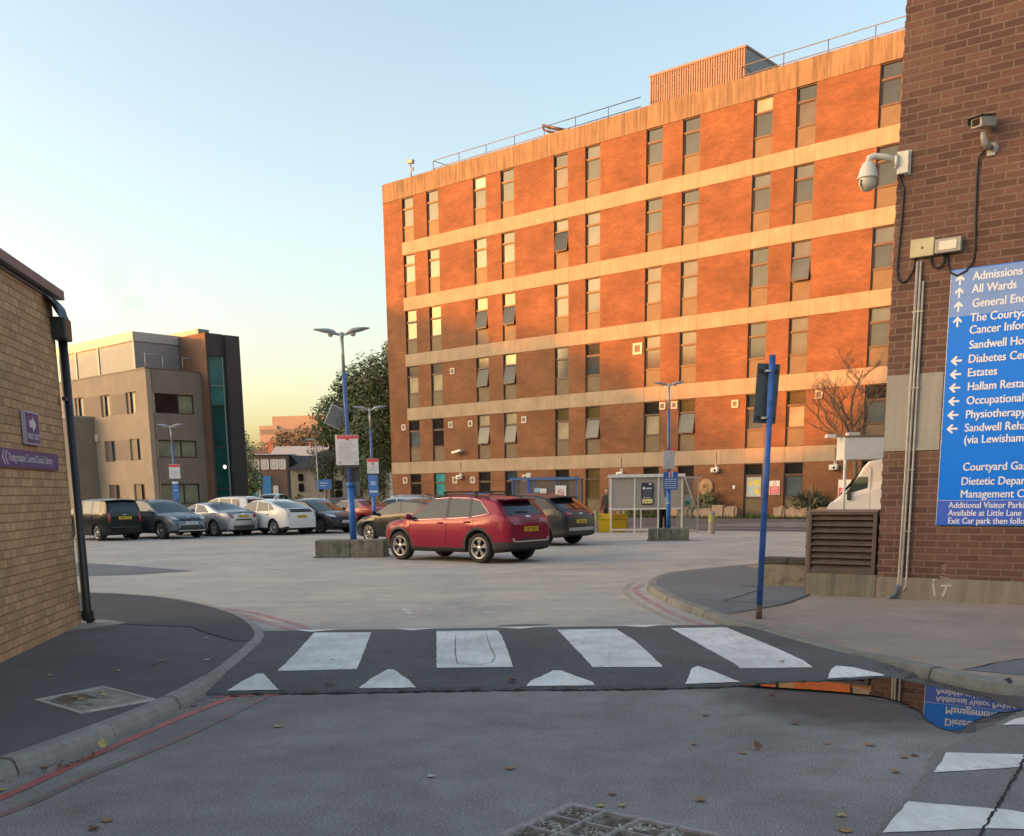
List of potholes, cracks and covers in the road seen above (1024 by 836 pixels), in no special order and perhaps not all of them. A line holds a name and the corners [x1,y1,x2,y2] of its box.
crack [978,756,1024,836]
crack [455,633,496,665]
